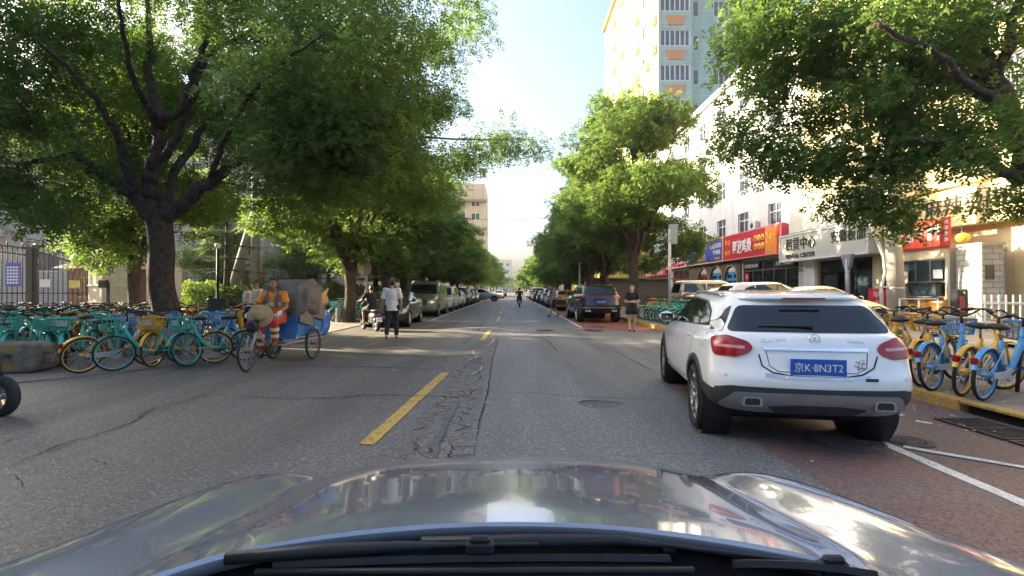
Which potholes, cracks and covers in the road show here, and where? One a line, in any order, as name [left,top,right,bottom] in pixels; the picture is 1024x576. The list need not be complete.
manhole cover [889,435,937,448]
manhole cover [805,430,888,452]
crack [226,342,492,460]
crack [3,381,241,488]
drain grate [934,418,1024,441]
